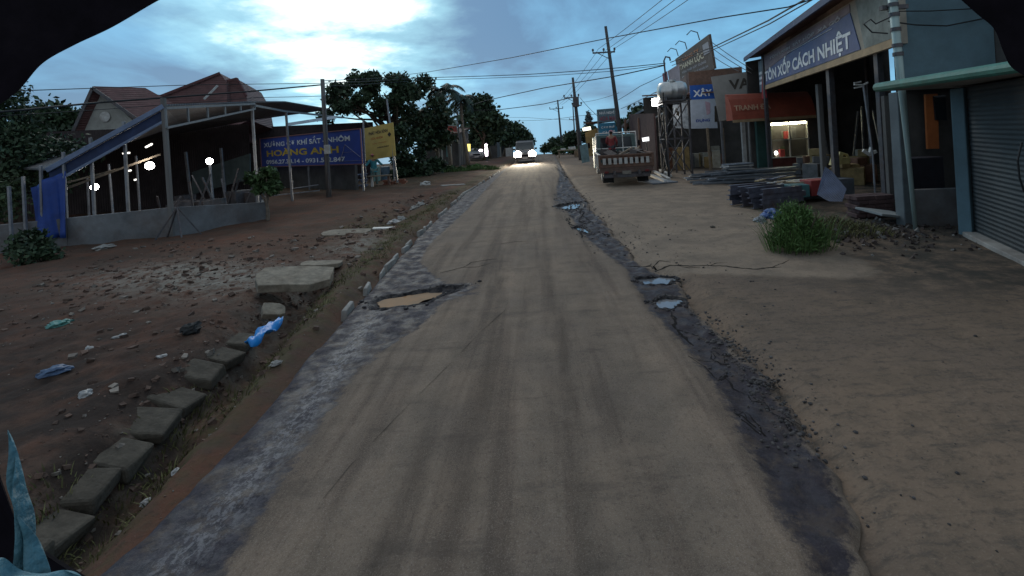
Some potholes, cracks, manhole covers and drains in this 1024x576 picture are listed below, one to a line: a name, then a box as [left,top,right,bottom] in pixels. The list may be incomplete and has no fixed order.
crack [630,260,787,271]
pothole [644,293,691,311]
crack [670,311,807,436]
pothole [552,201,590,211]
pothole [630,275,685,286]
pothole [570,224,592,235]
pothole [358,280,482,311]
